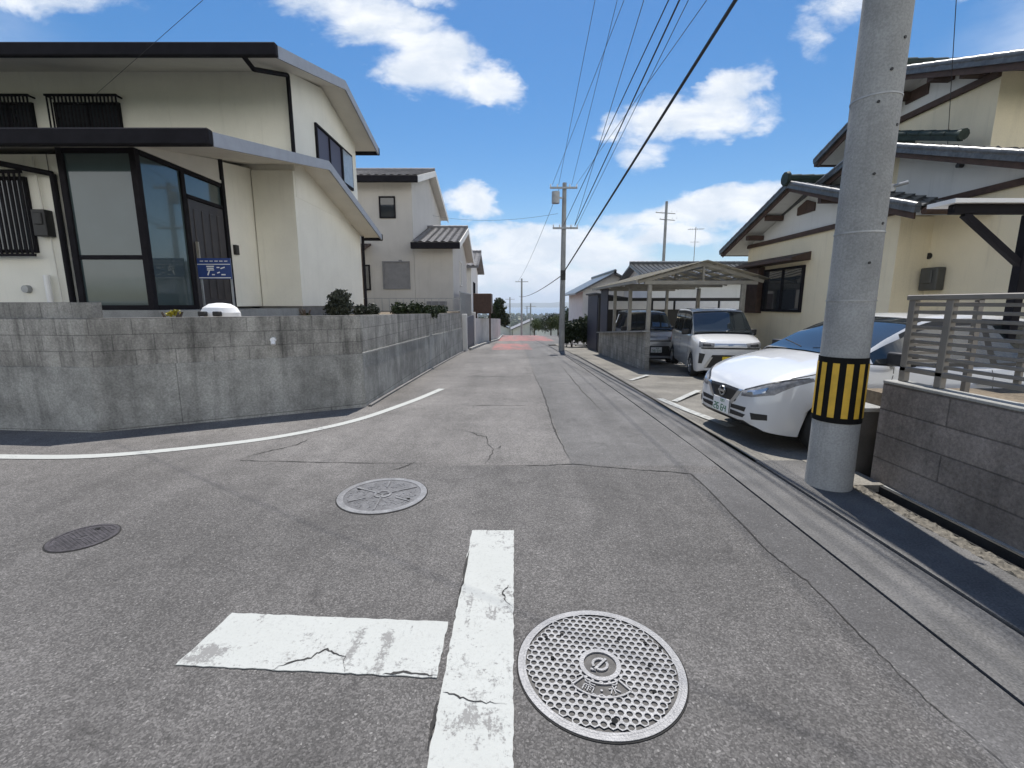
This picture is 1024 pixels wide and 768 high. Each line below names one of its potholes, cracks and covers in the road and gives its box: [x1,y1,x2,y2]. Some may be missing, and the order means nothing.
manhole cover [517,610,689,745]
manhole cover [42,524,122,553]
manhole cover [335,478,428,515]
crack [427,692,505,748]
crack [272,648,345,672]
